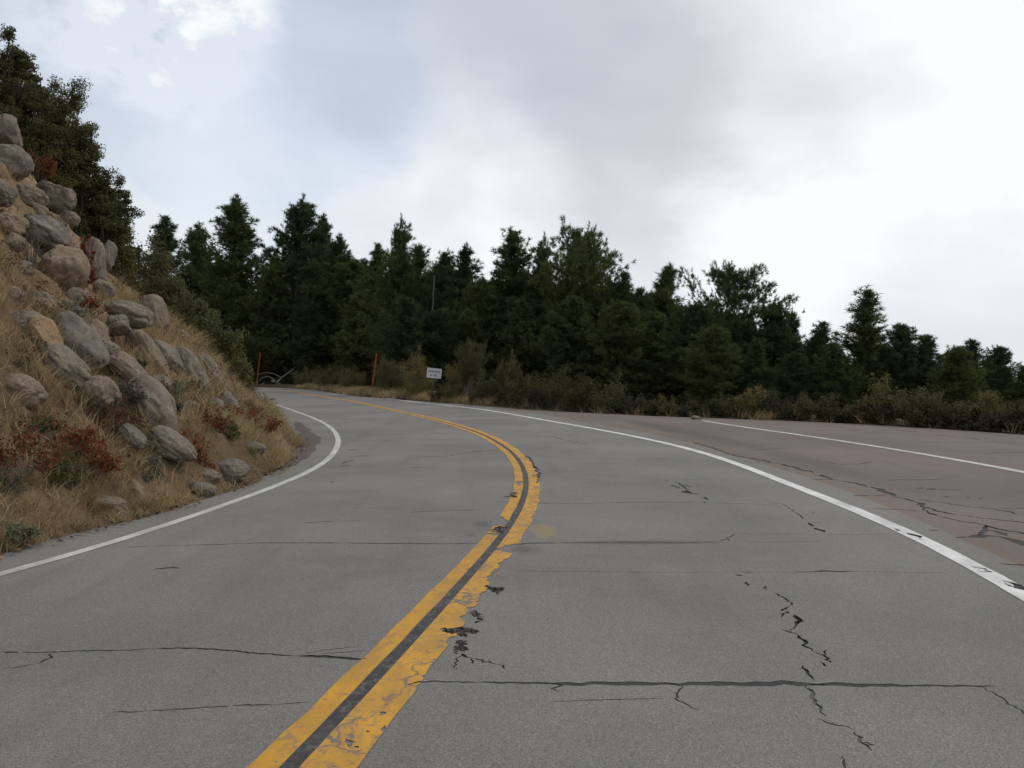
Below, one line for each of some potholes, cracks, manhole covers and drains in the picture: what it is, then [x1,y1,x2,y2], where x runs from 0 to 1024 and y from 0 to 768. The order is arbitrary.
crack [526,456,541,482]
crack [453,653,505,670]
crack [4,646,364,669]
crack [517,480,860,545]
crack [695,443,1024,539]
crack [565,570,921,681]
crack [116,702,306,713]
